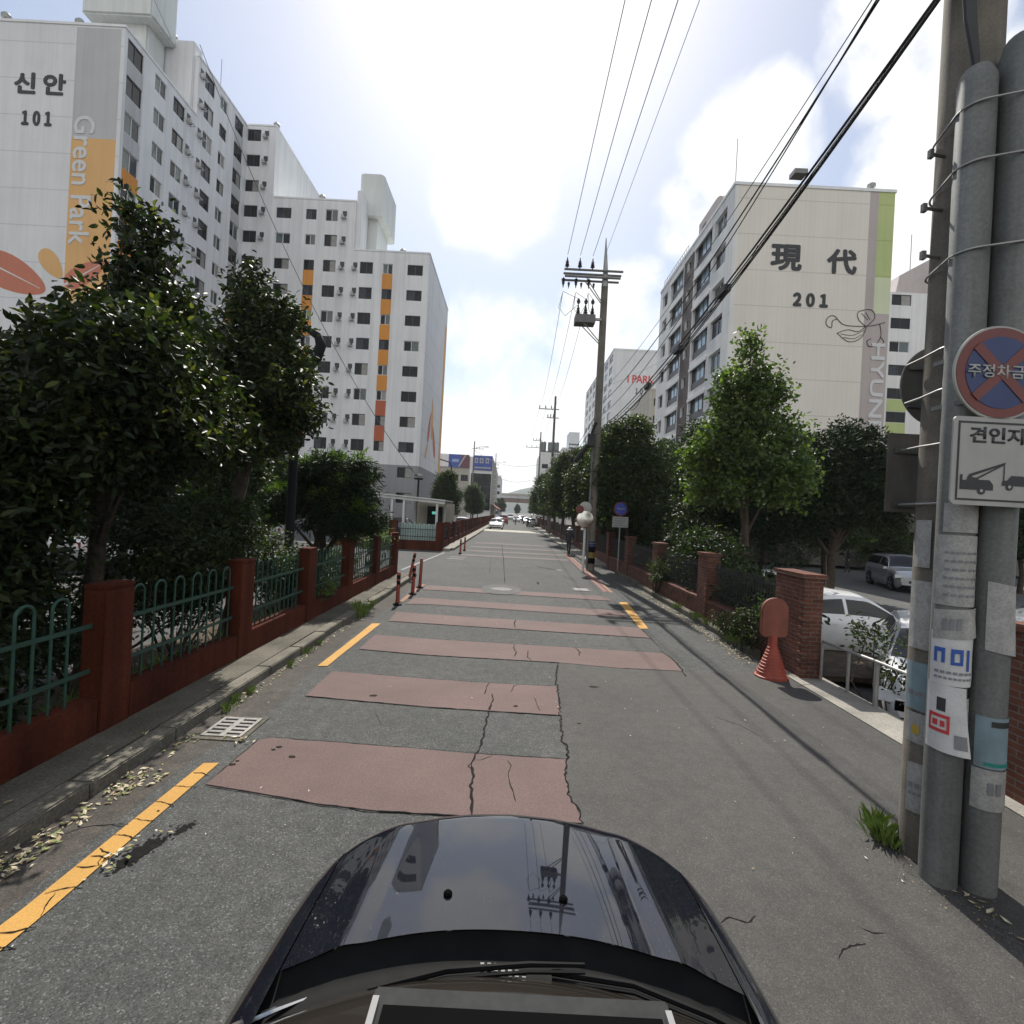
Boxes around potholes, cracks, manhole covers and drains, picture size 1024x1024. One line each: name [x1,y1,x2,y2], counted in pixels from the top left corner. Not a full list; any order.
drain grate [191,715,269,742]
crack [839,927,881,957]
crack [468,684,494,814]
crack [0,886,83,949]
manhole cover [481,584,521,595]
